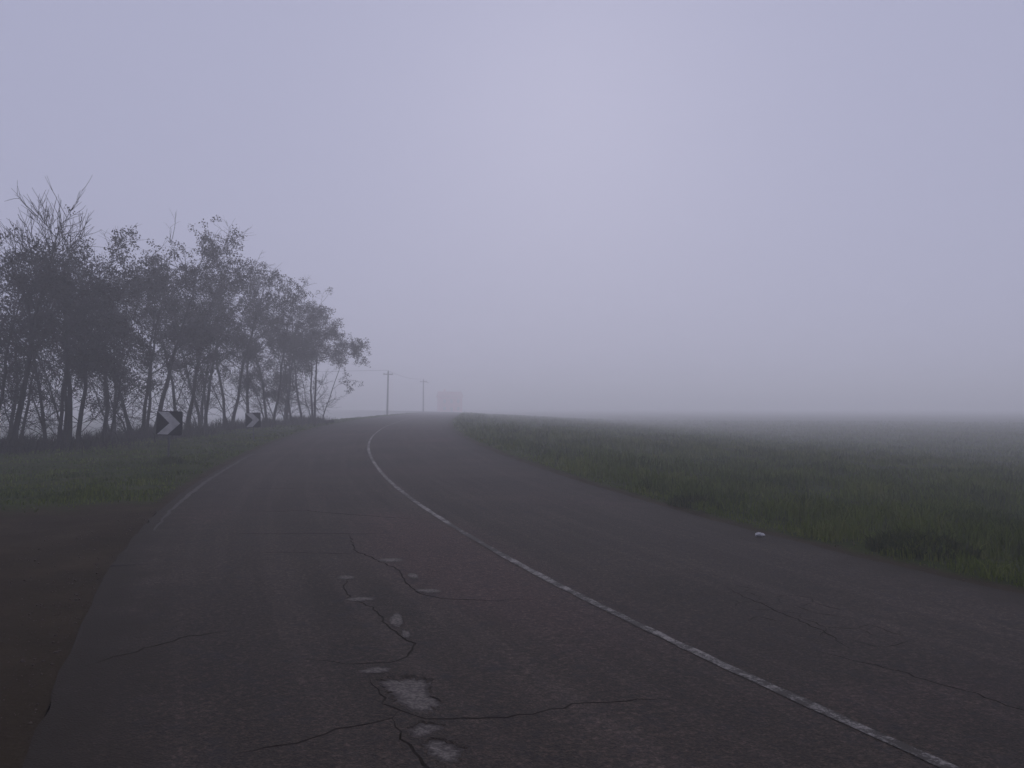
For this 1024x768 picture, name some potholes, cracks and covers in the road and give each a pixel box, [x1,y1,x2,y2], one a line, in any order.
pothole [418,737,469,765]
crack [233,510,681,768]
crack [87,631,225,666]
crack [728,585,1024,711]
pothole [405,720,447,737]
